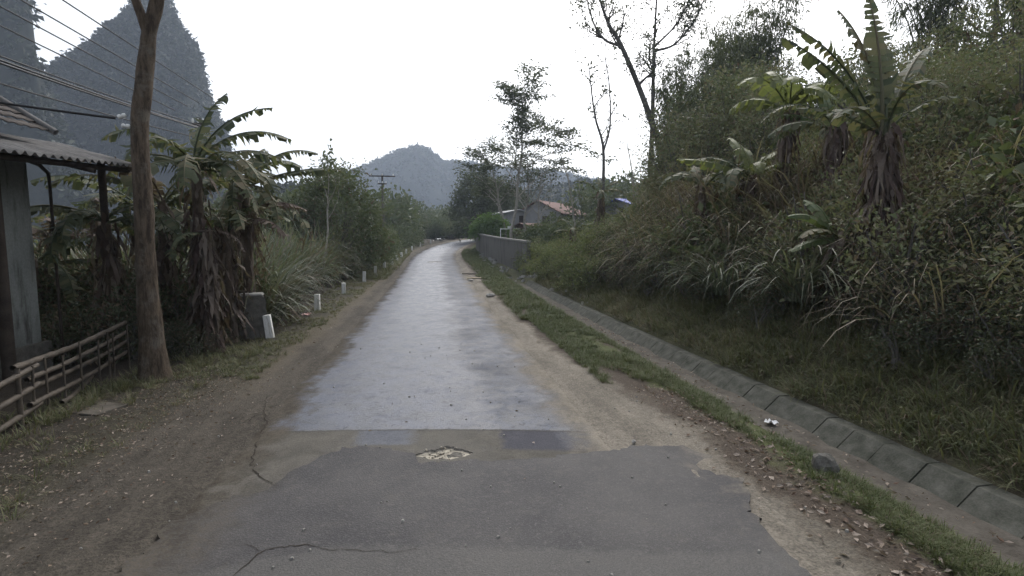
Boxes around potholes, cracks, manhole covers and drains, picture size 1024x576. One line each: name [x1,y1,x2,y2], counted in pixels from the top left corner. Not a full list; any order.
pothole [416,446,473,460]
crack [248,398,275,482]
crack [233,544,417,576]
